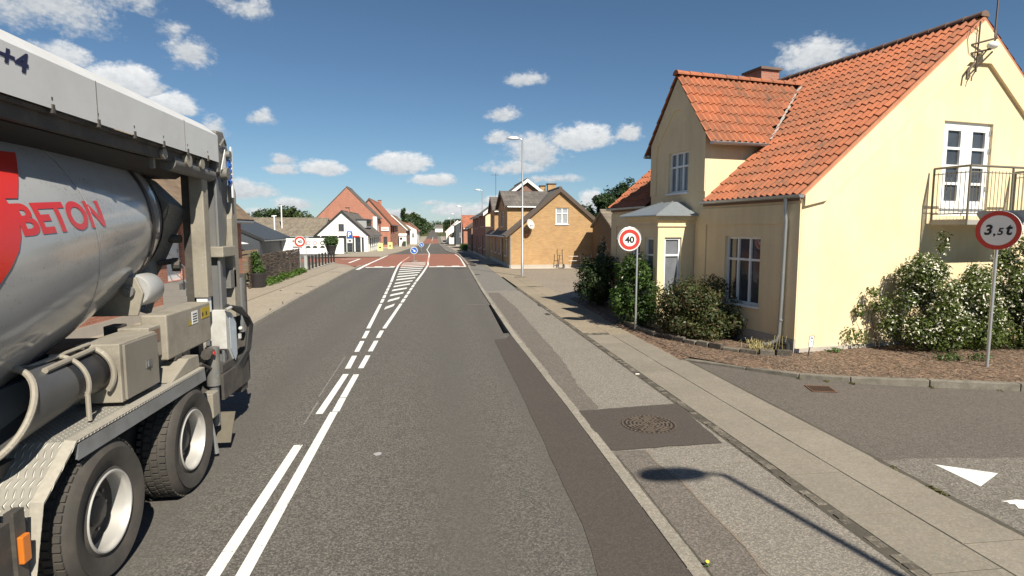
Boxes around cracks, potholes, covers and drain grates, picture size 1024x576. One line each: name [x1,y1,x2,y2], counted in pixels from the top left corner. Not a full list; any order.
manhole cover [621,415,677,434]
drain grate [804,385,838,393]
